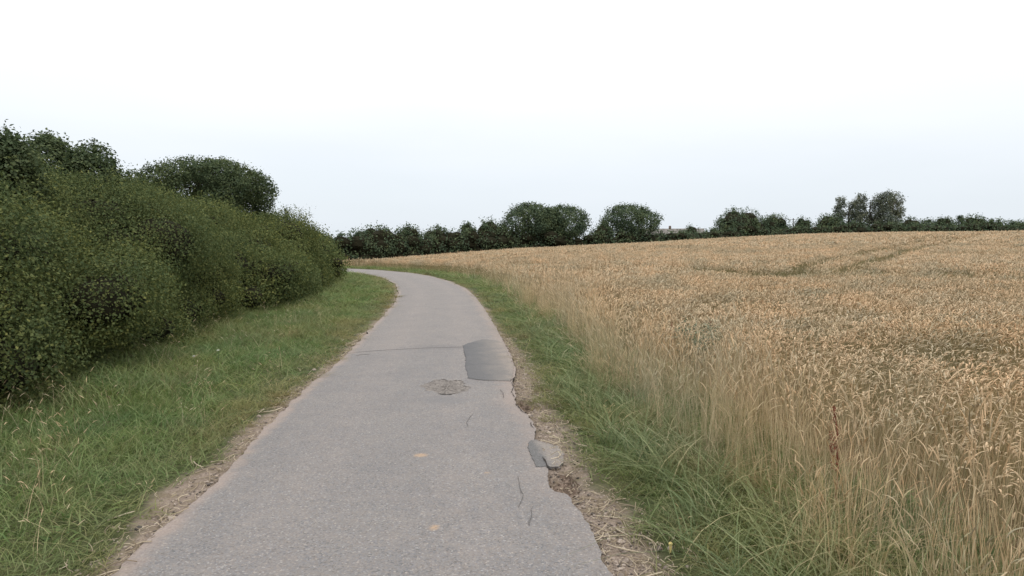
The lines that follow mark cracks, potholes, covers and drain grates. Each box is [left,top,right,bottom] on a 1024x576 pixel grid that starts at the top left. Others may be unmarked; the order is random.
pothole [420,379,471,395]
